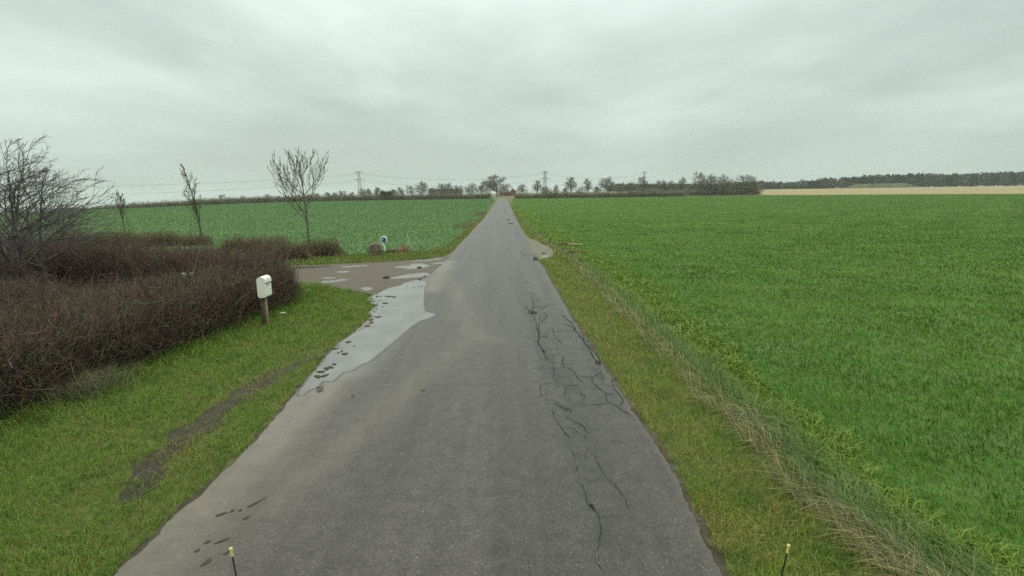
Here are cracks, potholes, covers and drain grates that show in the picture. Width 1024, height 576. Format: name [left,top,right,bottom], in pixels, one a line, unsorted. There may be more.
crack [526,293,631,571]
